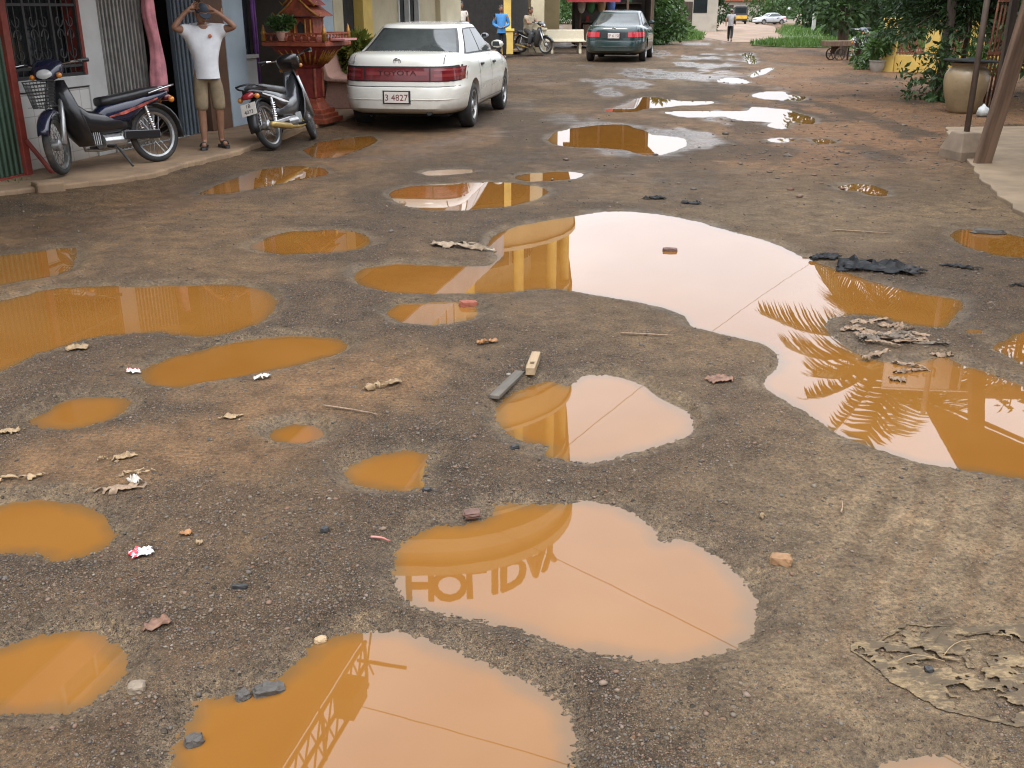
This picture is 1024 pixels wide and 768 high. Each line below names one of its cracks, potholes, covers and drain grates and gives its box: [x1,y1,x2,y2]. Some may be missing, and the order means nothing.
pothole [0,277,284,372]
pothole [15,380,154,431]
pothole [362,478,787,676]
pothole [296,135,387,158]
pothole [252,409,343,443]
pothole [238,225,392,256]
pothole [381,179,562,213]
pothole [538,123,698,156]
pothole [187,164,341,195]
pothole [113,327,358,390]
pothole [0,242,90,288]
pothole [344,205,1024,487]
